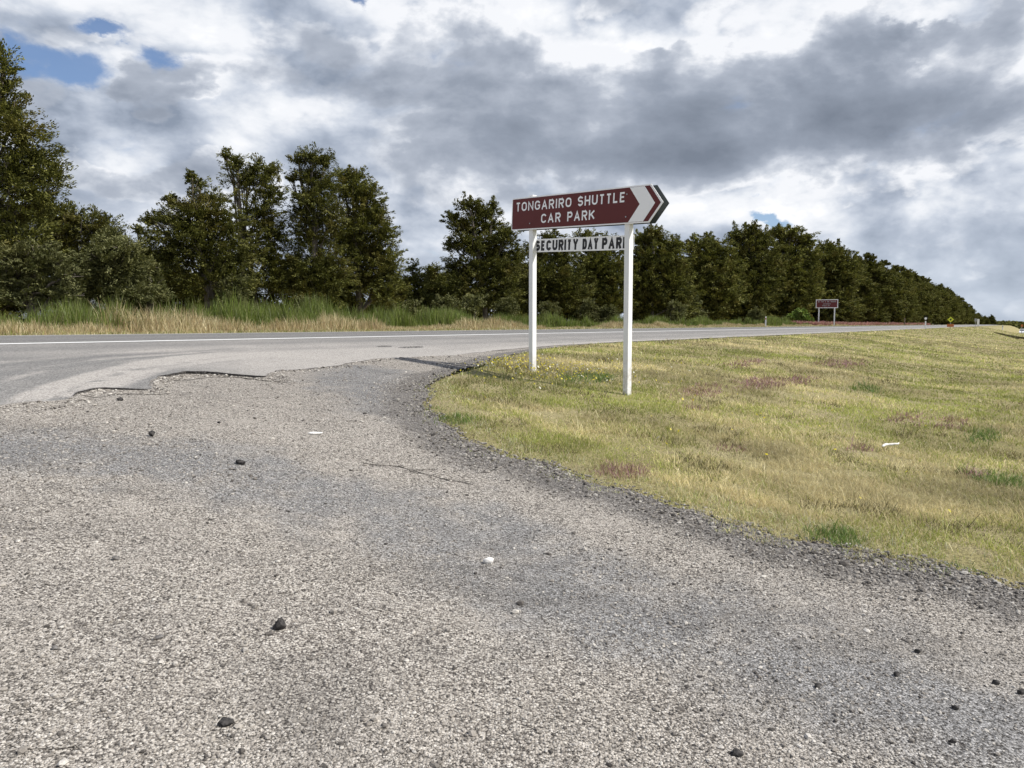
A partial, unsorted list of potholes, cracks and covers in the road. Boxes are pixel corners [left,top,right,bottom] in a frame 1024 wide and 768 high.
crack [362,462,473,485]
